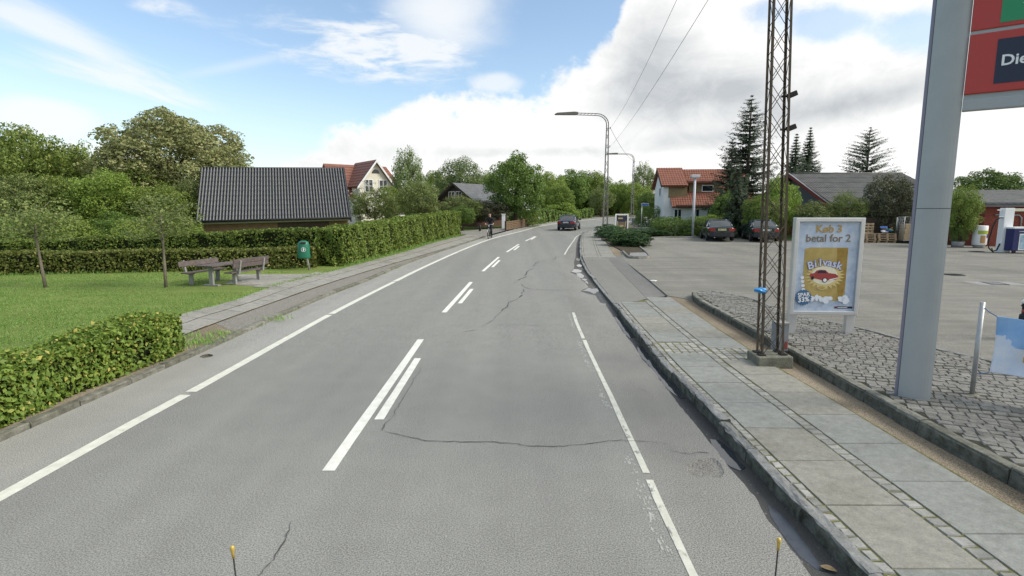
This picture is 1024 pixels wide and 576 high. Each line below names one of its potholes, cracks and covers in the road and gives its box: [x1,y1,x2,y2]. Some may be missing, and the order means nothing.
crack [258,514,291,576]
crack [471,256,556,331]
crack [382,368,671,447]
pothole [686,458,724,478]
